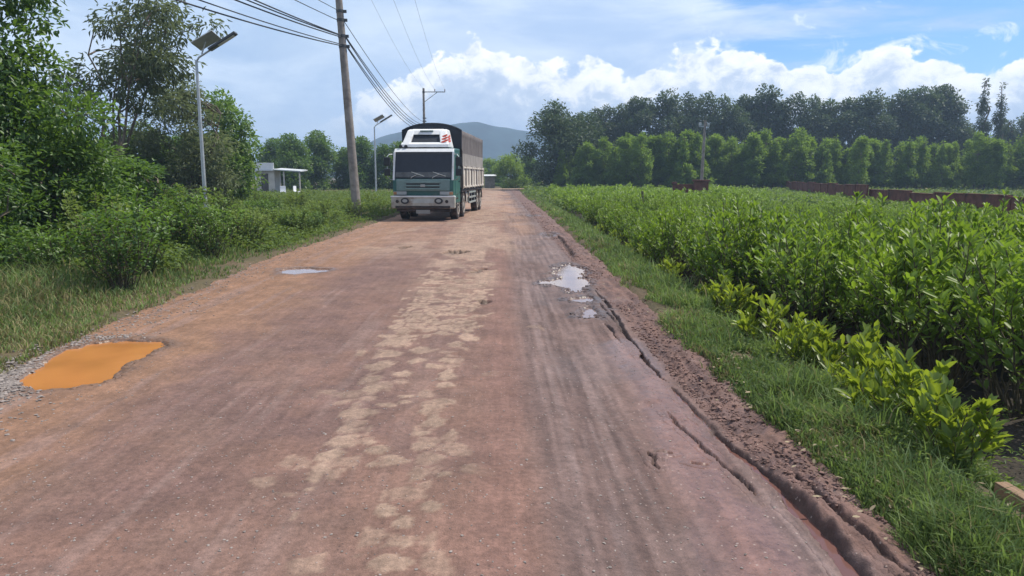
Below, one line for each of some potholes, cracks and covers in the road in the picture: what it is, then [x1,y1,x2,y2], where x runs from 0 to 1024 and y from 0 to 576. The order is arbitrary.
pothole [557,294,608,304]
pothole [532,262,598,294]
pothole [569,305,614,320]
pothole [275,266,337,275]
pothole [6,336,174,393]
crack [638,408,920,576]
